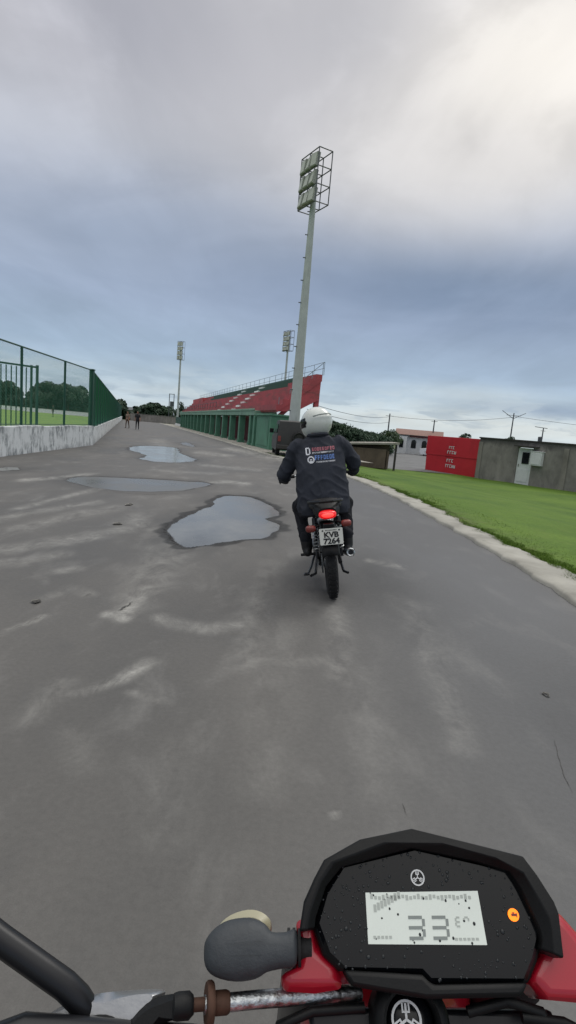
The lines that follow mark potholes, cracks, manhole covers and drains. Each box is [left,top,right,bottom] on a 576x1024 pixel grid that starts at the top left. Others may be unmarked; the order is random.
pothole [162,495,282,548]
